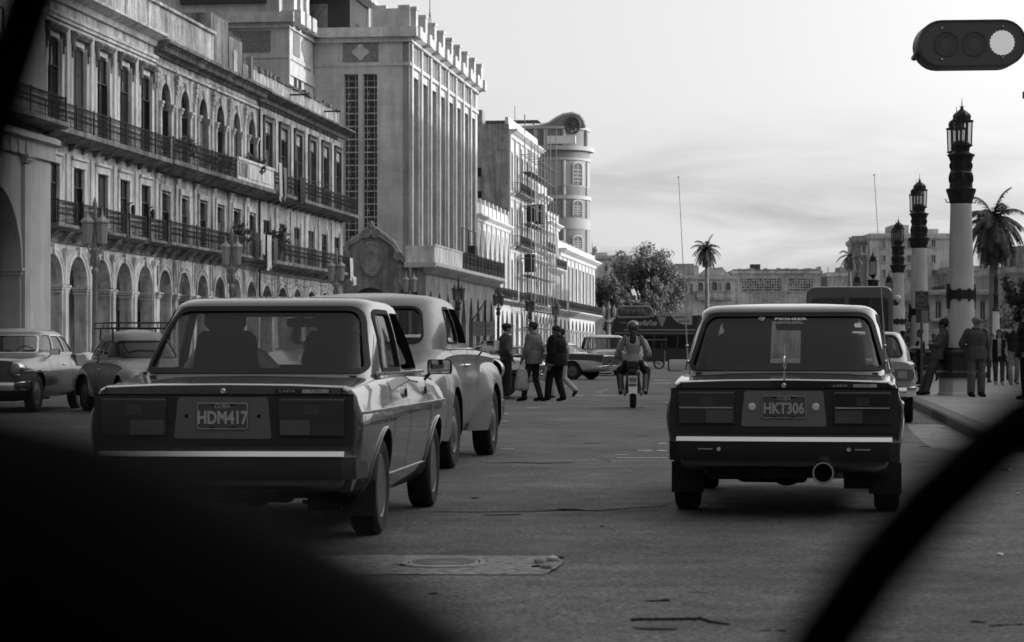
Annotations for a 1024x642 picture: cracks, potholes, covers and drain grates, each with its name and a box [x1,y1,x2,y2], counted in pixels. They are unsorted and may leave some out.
manhole cover [402,557,486,568]
crack [630,592,730,624]
